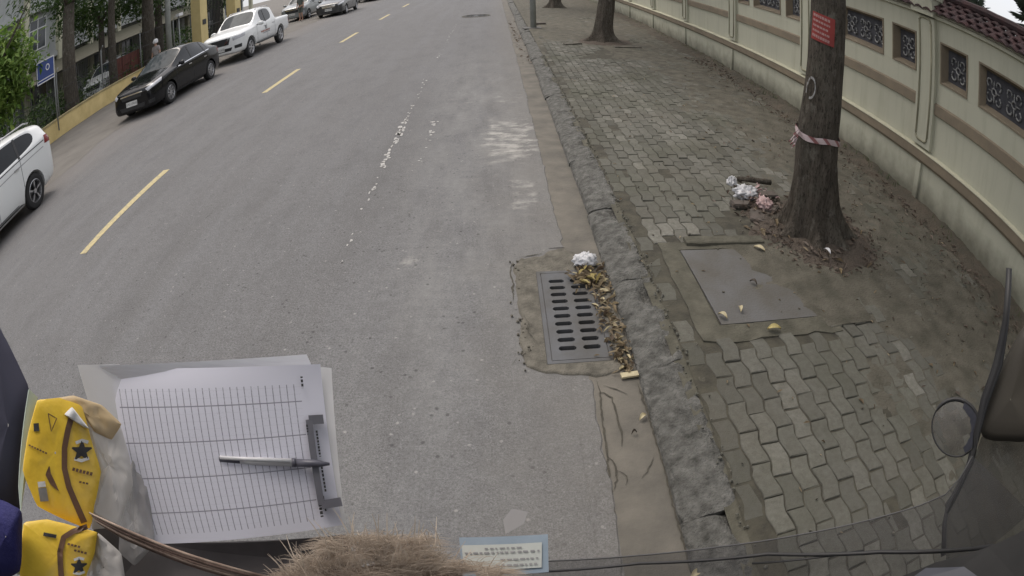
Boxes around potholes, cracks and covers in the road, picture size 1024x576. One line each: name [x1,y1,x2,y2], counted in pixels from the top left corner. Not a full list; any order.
drain grate [536,269,614,365]
manhole cover [657,235,843,343]
crack [597,383,686,550]
